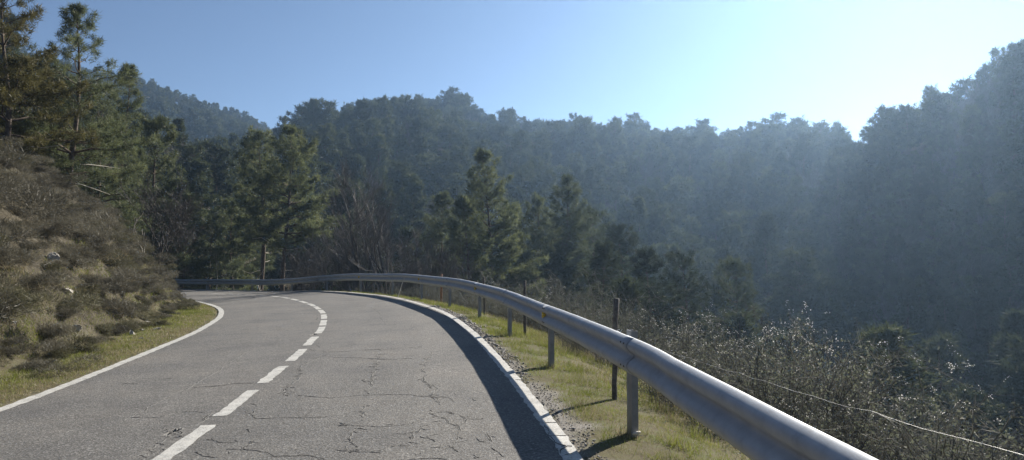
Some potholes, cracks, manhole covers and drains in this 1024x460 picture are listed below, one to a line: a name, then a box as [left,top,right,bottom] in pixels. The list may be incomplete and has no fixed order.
crack [122,344,505,460]
